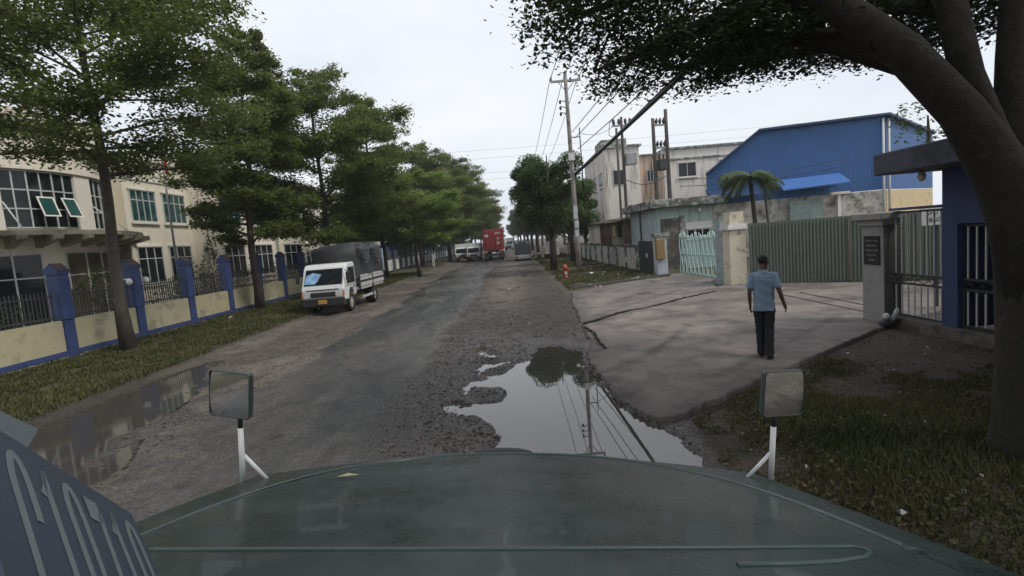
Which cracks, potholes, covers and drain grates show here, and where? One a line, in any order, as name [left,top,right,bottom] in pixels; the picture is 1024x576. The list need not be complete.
pothole [409,341,721,469]
crack [583,291,716,349]
